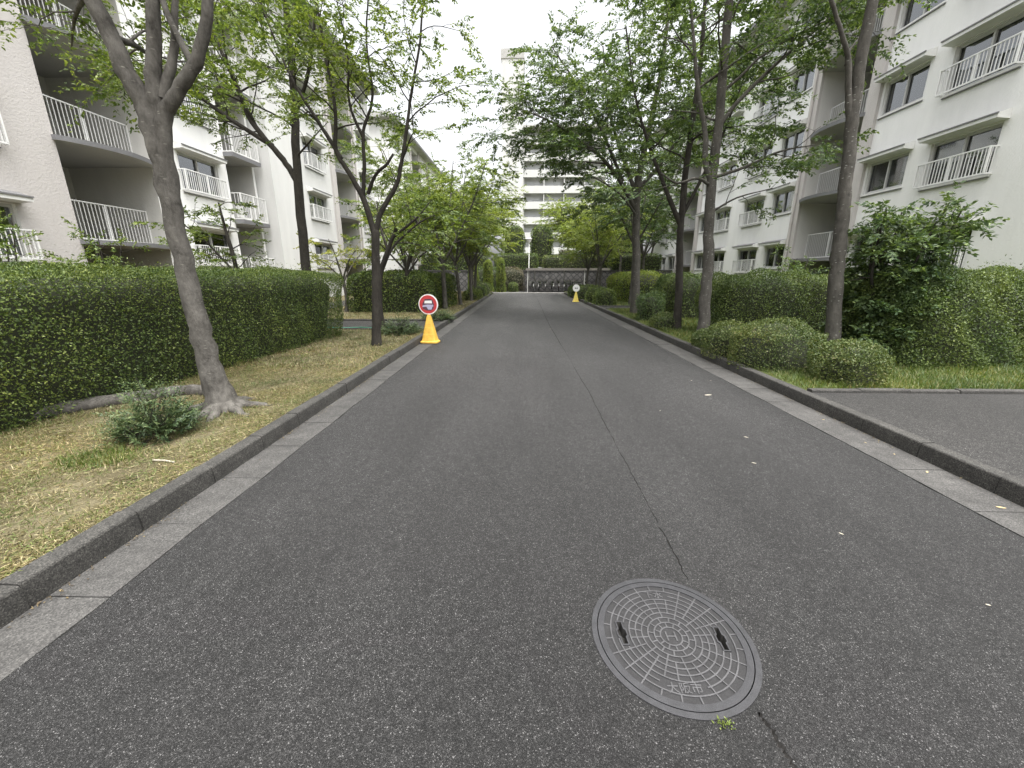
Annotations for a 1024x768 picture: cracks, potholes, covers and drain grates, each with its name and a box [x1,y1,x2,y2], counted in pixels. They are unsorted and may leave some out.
crack [758,712,797,768]
crack [539,303,688,579]
manhole cover [592,578,763,721]
